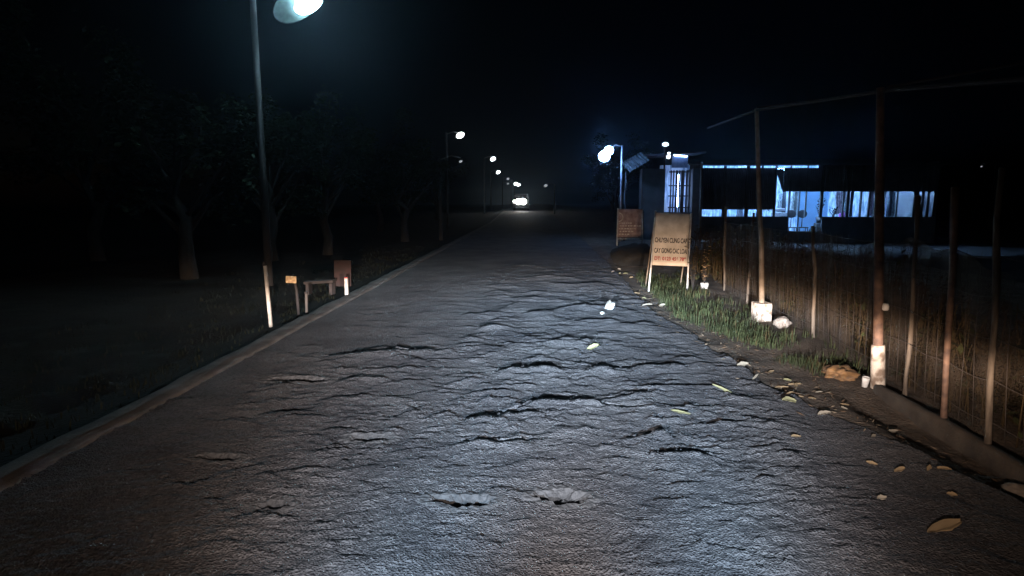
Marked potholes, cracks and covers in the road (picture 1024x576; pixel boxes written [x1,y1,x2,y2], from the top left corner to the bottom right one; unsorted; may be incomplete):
pothole [417,490,508,514]
crack [621,428,713,457]
pothole [338,431,401,444]
crack [586,362,686,370]
pothole [256,374,338,384]
crack [328,348,435,357]
crack [463,389,665,420]
pothole [180,451,251,465]
pothole [519,484,605,510]
